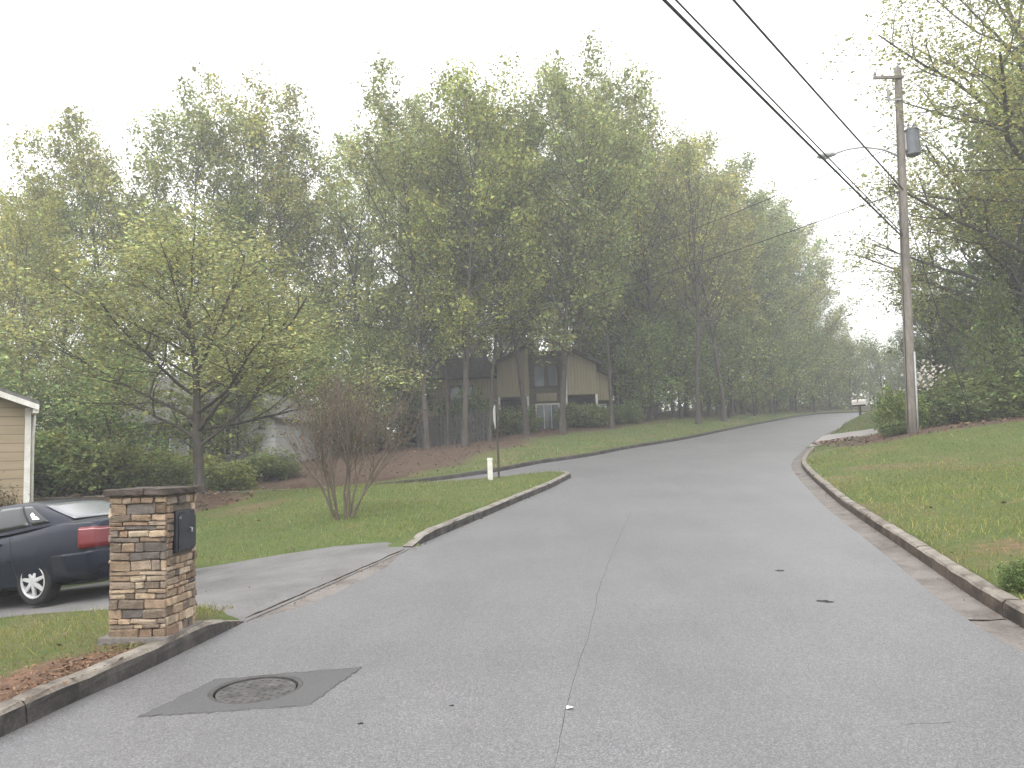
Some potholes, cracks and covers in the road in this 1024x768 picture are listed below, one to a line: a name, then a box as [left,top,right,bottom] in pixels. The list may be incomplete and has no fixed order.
manhole cover [208,674,303,704]
crack [554,513,631,768]
